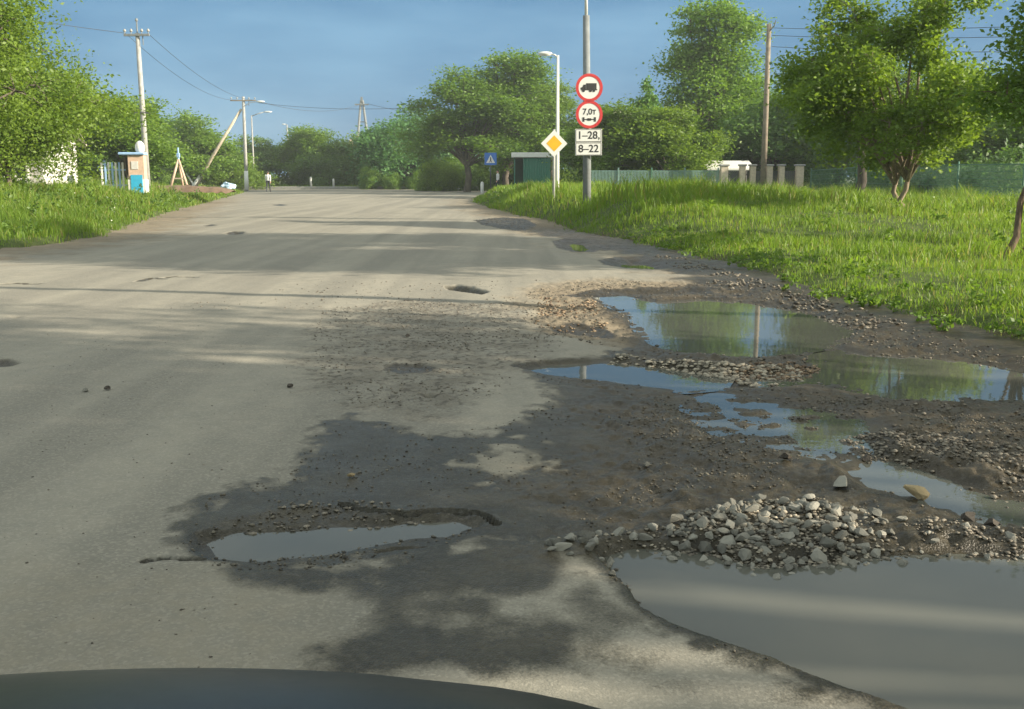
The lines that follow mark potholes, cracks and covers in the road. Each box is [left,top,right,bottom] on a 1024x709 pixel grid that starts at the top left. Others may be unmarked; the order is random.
pothole [374,360,448,375]
pothole [439,284,493,295]
pothole [471,217,539,231]
pothole [668,391,898,467]
pothole [731,346,1024,405]
pothole [169,502,505,577]
pothole [514,357,734,395]
pothole [549,238,610,252]
pothole [834,446,1024,528]
pothole [0,356,33,368]
pothole [593,295,861,359]
pothole [578,528,1024,709]
